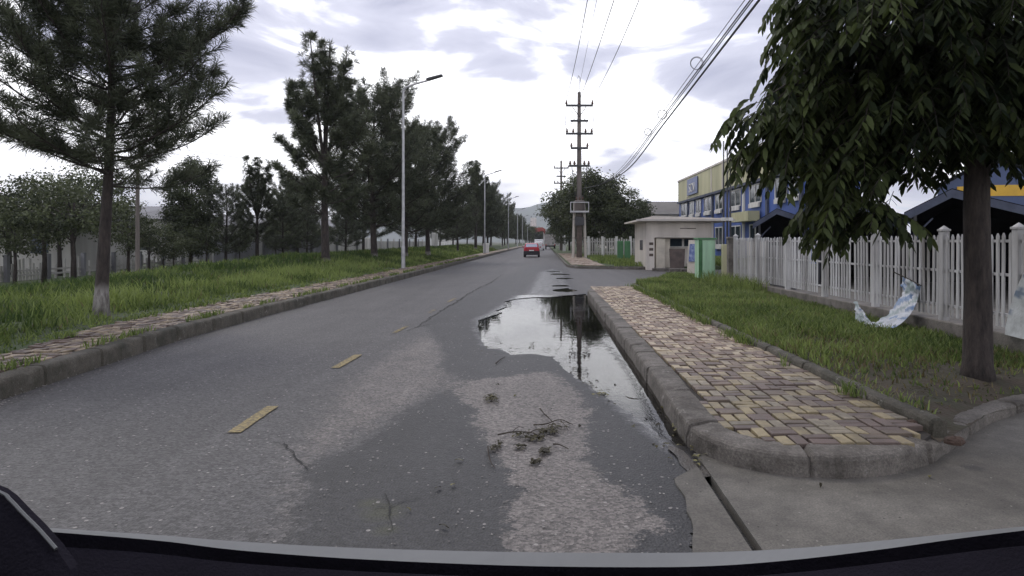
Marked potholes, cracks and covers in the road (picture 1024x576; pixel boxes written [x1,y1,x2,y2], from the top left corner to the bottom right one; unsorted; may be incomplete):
pothole [478,294,696,468]
crack [273,441,313,472]
crack [373,493,422,530]
